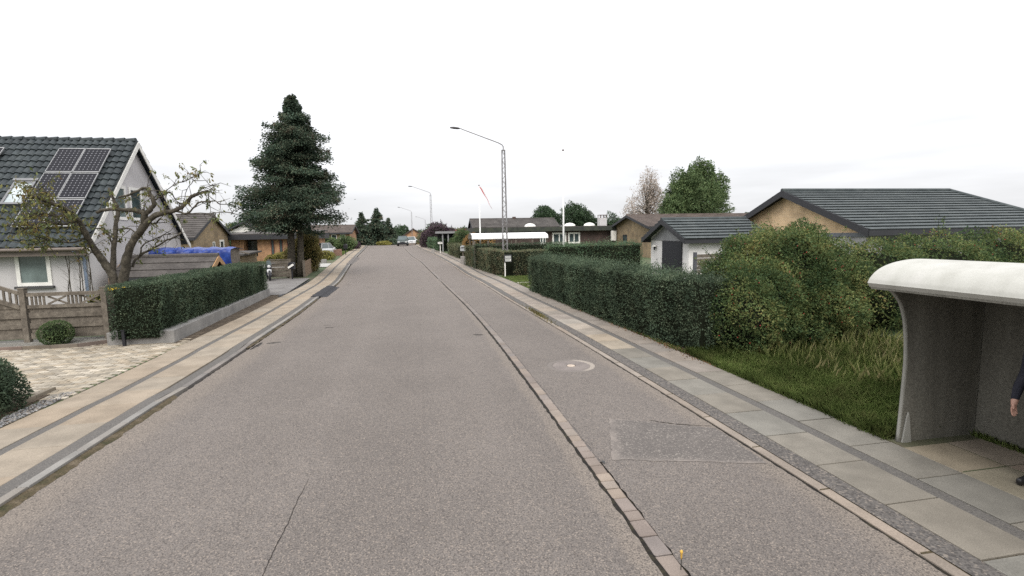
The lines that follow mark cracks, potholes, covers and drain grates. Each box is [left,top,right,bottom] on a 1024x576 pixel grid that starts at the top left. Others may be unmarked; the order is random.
manhole cover [547,360,595,372]
crack [262,479,309,576]
